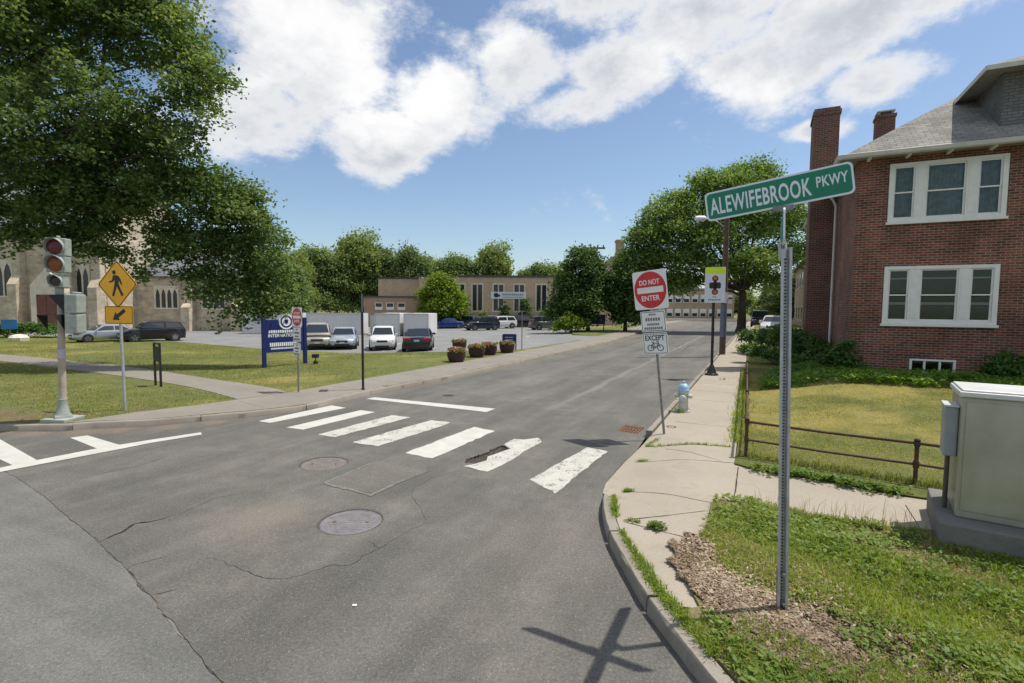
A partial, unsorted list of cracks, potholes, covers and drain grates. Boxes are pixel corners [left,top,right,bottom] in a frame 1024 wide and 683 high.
crack [221,471,457,579]
manhole cover [317,509,384,536]
drain grate [618,425,644,434]
crack [3,471,229,683]
pothole [465,446,509,463]
manhole cover [299,457,349,471]
